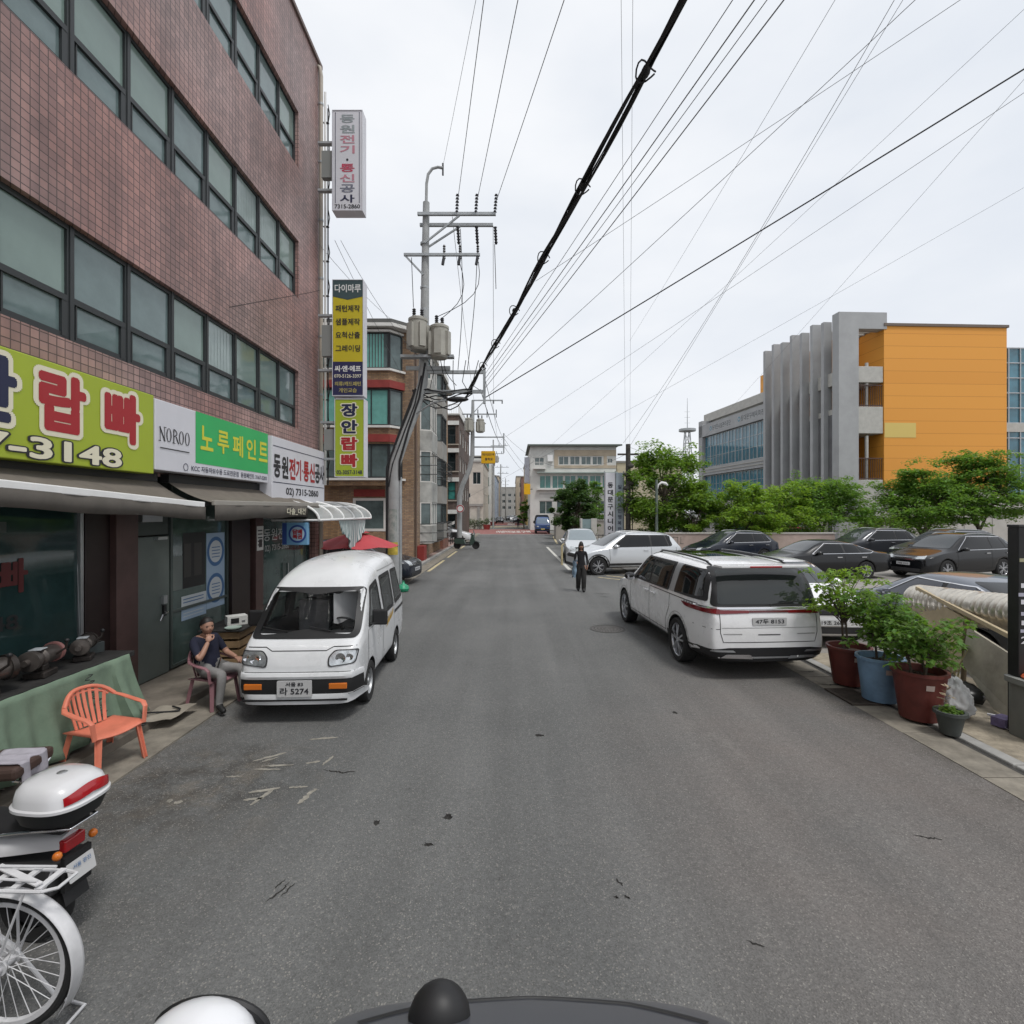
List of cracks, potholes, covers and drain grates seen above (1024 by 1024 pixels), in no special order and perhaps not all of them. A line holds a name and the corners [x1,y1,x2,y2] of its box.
manhole cover [590,625,625,633]
crack [265,880,295,902]
